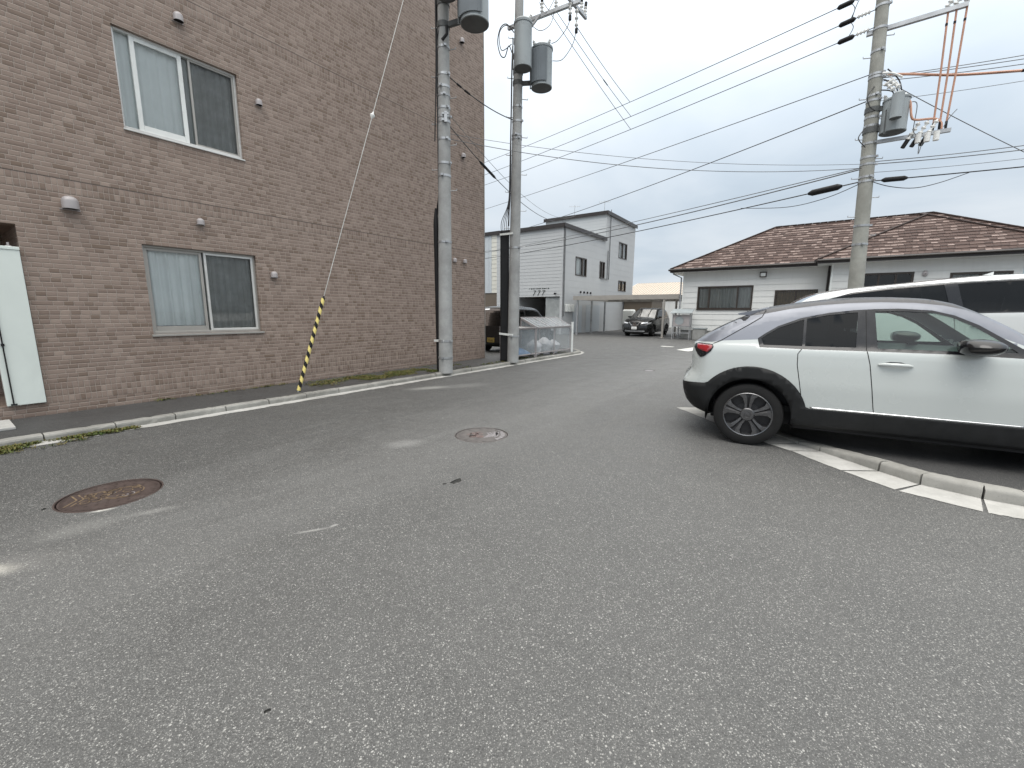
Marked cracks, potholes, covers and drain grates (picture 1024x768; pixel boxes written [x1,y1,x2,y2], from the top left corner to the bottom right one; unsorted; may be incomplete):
manhole cover [52,478,164,513]
manhole cover [454,427,509,443]
